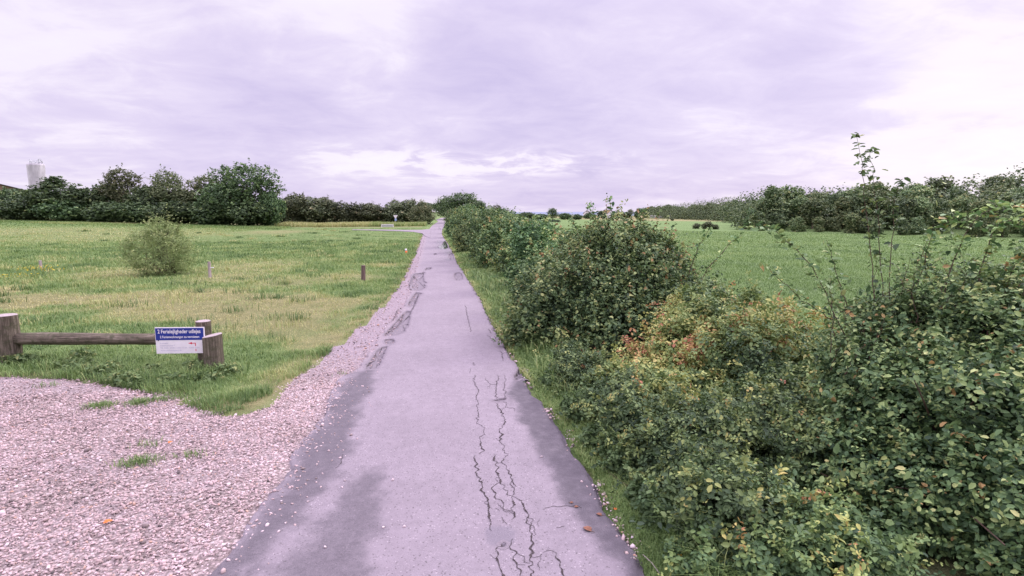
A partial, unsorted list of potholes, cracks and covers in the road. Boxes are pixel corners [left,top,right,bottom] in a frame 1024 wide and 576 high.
pothole [405,292,424,307]
pothole [409,273,429,291]
pothole [363,346,389,370]
pothole [382,311,413,336]
crack [470,364,575,576]
